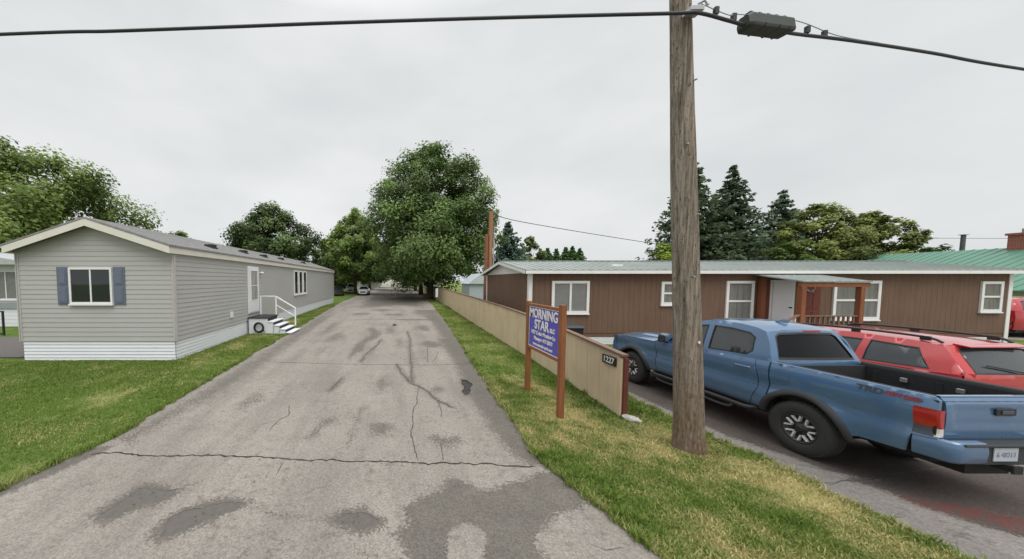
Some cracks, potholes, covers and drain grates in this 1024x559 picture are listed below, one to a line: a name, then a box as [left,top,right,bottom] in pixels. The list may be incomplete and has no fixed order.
crack [91,319,535,475]
pothole [461,379,473,395]
